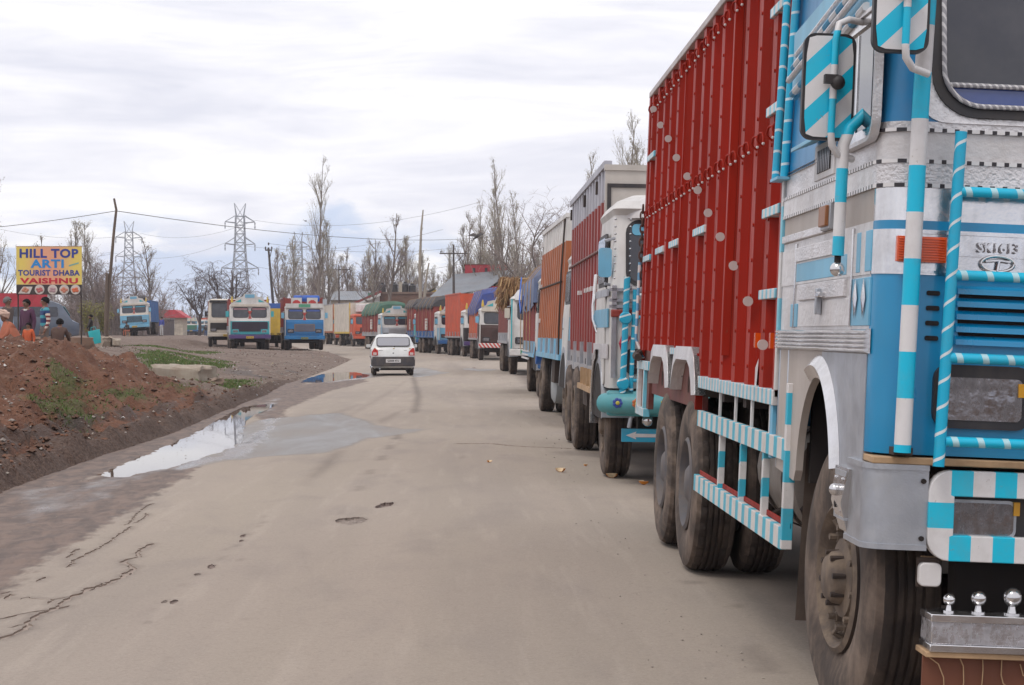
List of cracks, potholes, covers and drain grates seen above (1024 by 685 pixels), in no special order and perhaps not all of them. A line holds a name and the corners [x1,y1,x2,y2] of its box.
crack [0,503,155,640]
pothole [335,517,367,525]
